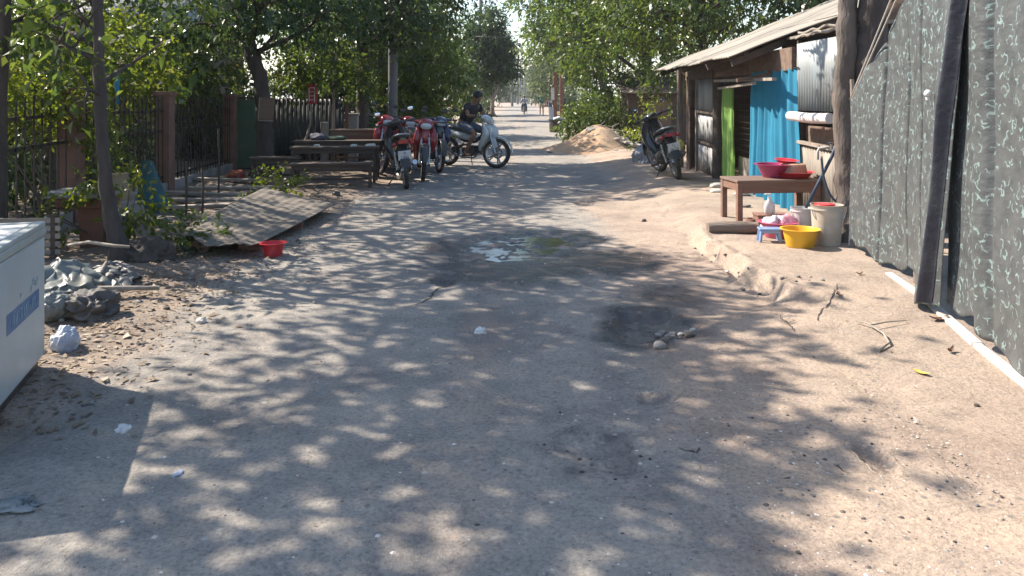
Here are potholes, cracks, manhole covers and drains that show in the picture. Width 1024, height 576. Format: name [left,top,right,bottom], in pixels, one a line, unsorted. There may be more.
pothole [449,230,606,268]
pothole [603,307,702,348]
pothole [545,424,637,476]
